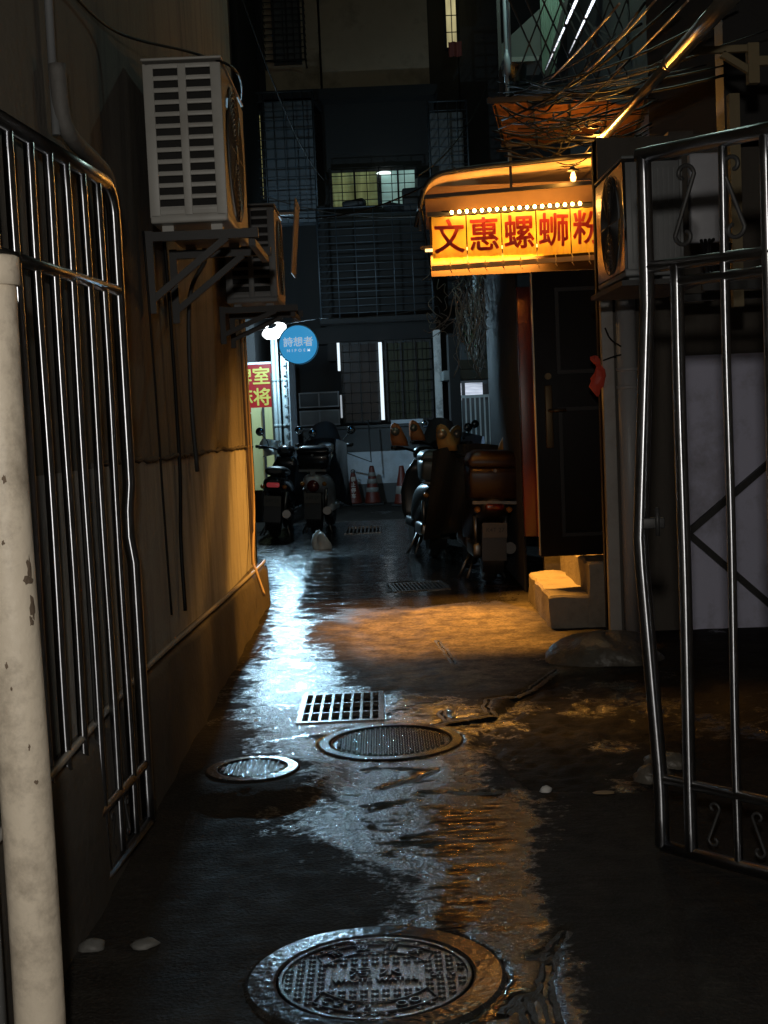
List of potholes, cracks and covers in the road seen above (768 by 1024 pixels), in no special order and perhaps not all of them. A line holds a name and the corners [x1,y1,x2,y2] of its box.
manhole cover [243,926,507,1024]
crack [497,930,574,1024]
crack [406,640,559,733]
drain grate [296,690,384,725]
drain grate [344,525,381,534]
manhole cover [205,756,300,783]
drain grate [387,580,451,593]
manhole cover [318,723,464,762]
